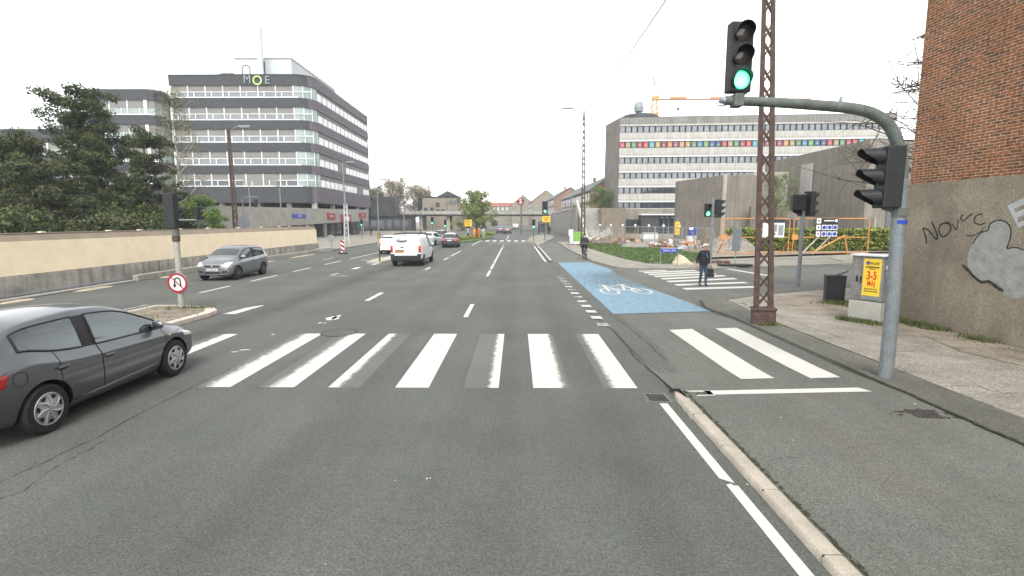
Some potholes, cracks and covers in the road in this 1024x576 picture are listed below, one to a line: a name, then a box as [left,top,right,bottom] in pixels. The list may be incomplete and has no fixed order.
manhole cover [320,329,357,337]
crack [615,320,674,396]
drain grate [889,409,960,419]
drain grate [641,393,674,403]
